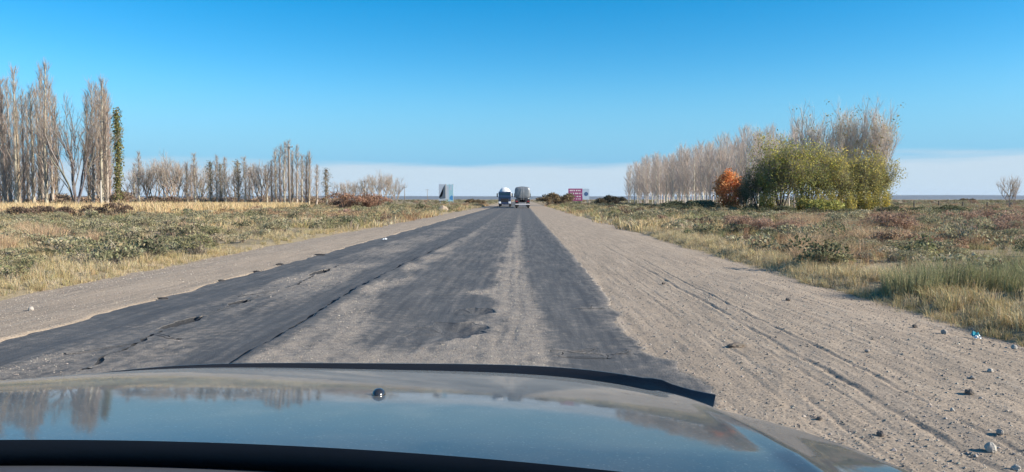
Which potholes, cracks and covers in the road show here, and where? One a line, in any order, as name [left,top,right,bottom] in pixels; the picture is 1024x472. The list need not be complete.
crack [64,244,446,369]
pothole [446,307,505,317]
pothole [391,320,504,346]
